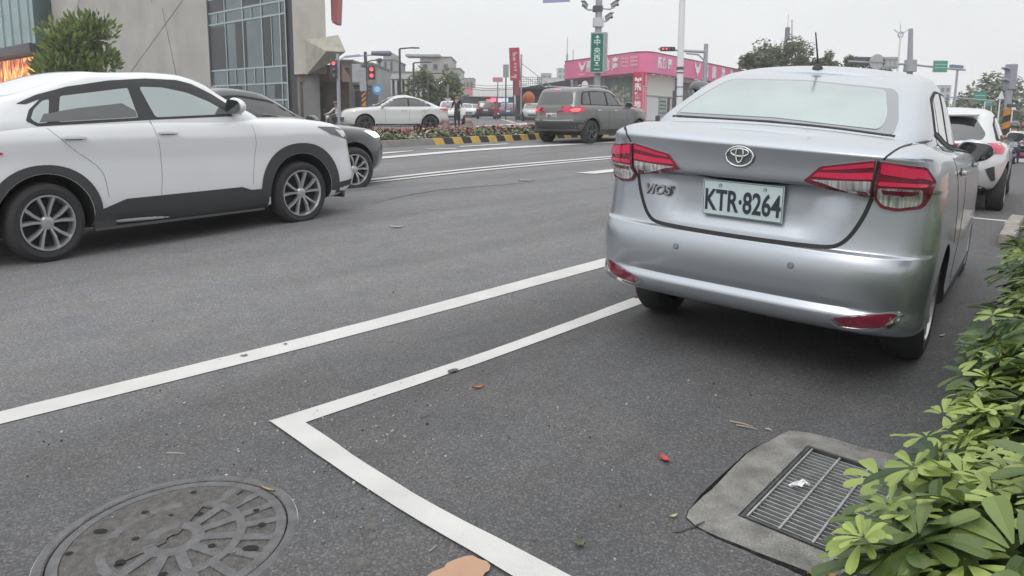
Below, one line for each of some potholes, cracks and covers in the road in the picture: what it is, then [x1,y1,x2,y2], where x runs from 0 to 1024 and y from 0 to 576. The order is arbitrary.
drain grate [740,446,889,557]
manhole cover [30,476,298,576]
